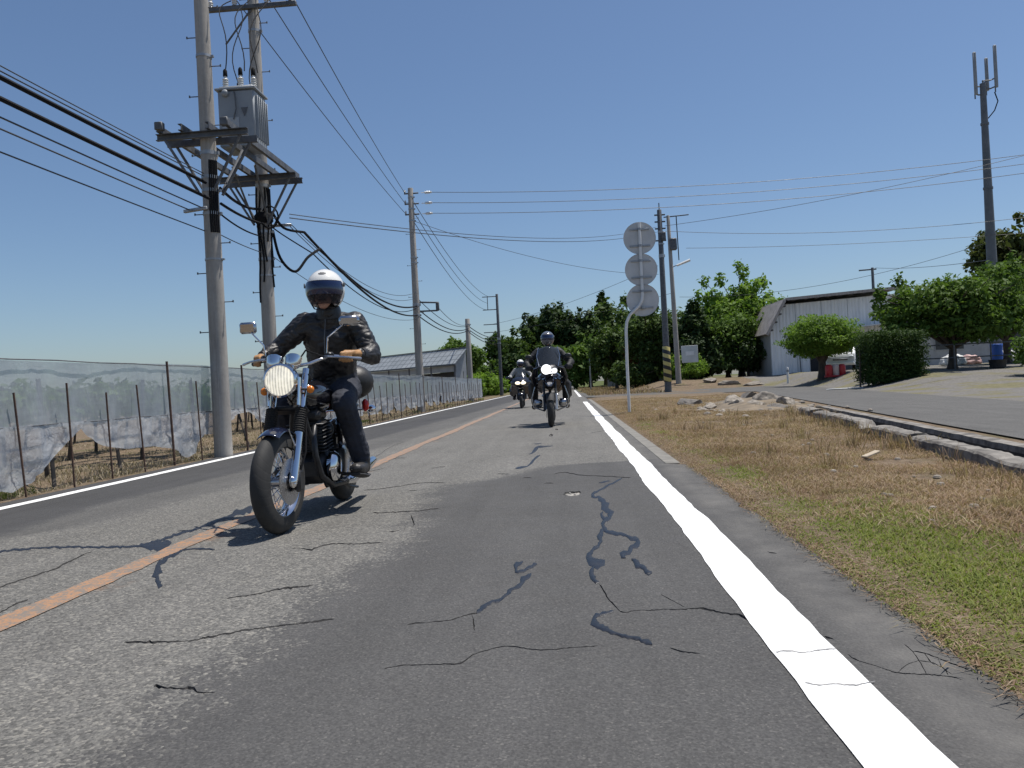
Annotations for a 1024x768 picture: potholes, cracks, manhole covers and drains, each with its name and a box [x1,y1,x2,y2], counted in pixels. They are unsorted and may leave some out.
crack [125,619,333,644]
crack [227,585,312,599]
crack [776,636,967,686]
crack [154,684,215,694]
crack [385,613,595,669]
crack [515,455,630,484]
crack [0,552,91,613]
